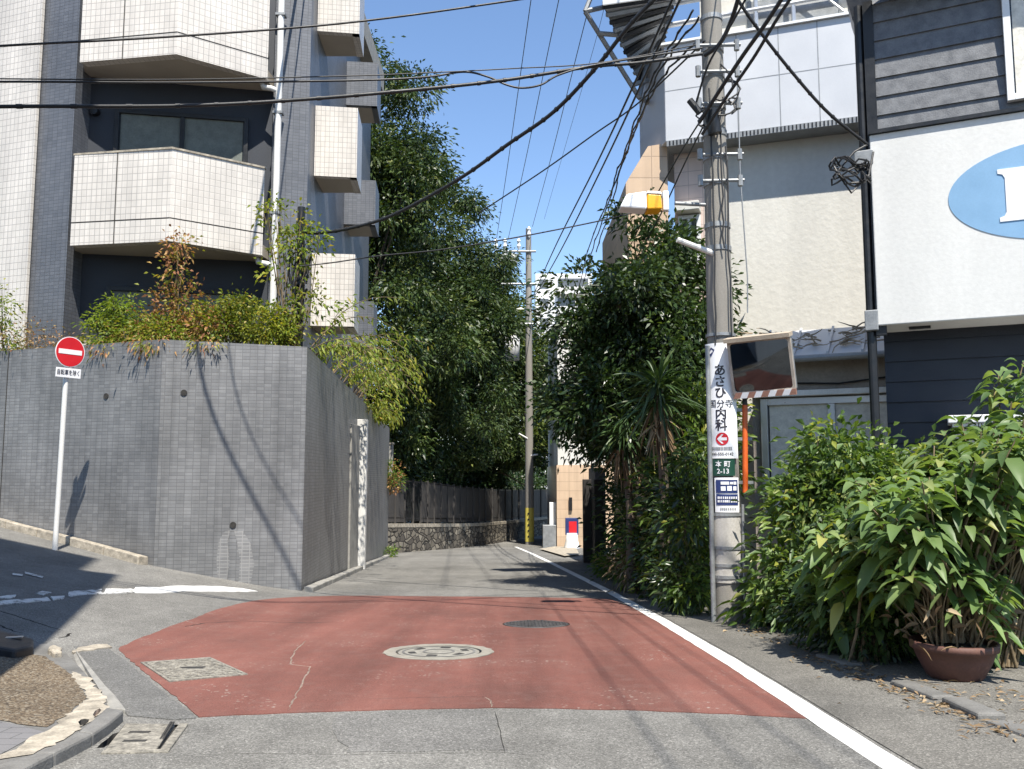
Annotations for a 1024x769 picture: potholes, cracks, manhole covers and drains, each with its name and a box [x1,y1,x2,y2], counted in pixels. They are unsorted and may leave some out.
manhole cover [140,657,248,682]
crack [288,641,311,710]
manhole cover [383,644,494,660]
manhole cover [503,620,569,628]
